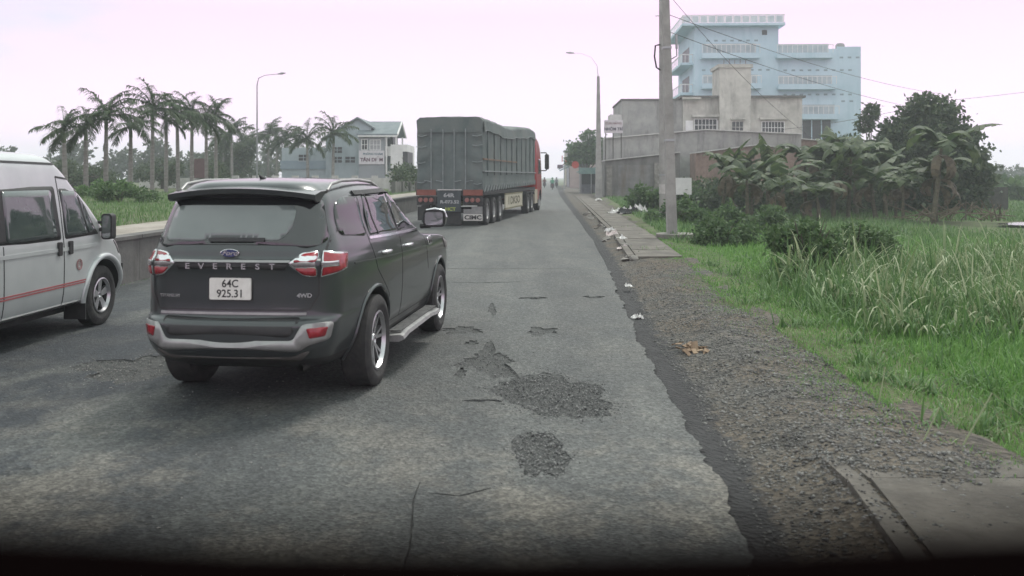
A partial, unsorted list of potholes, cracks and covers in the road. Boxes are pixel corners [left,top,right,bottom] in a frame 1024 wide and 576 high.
pothole [473,366,635,428]
pothole [445,339,524,383]
pothole [527,327,558,336]
pothole [441,326,483,335]
pothole [498,426,581,488]
crack [411,483,490,520]
